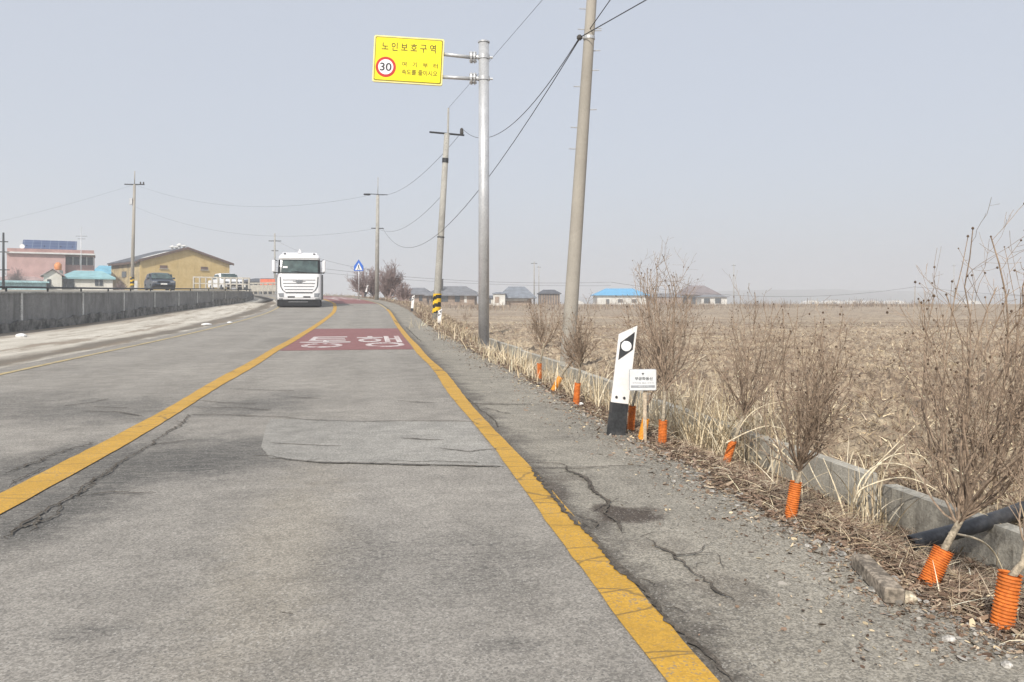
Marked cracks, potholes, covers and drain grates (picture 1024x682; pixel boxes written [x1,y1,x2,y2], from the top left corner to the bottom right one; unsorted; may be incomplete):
crack [253,438,495,466]
crack [531,462,651,533]
crack [3,389,456,539]
crack [641,532,735,600]
